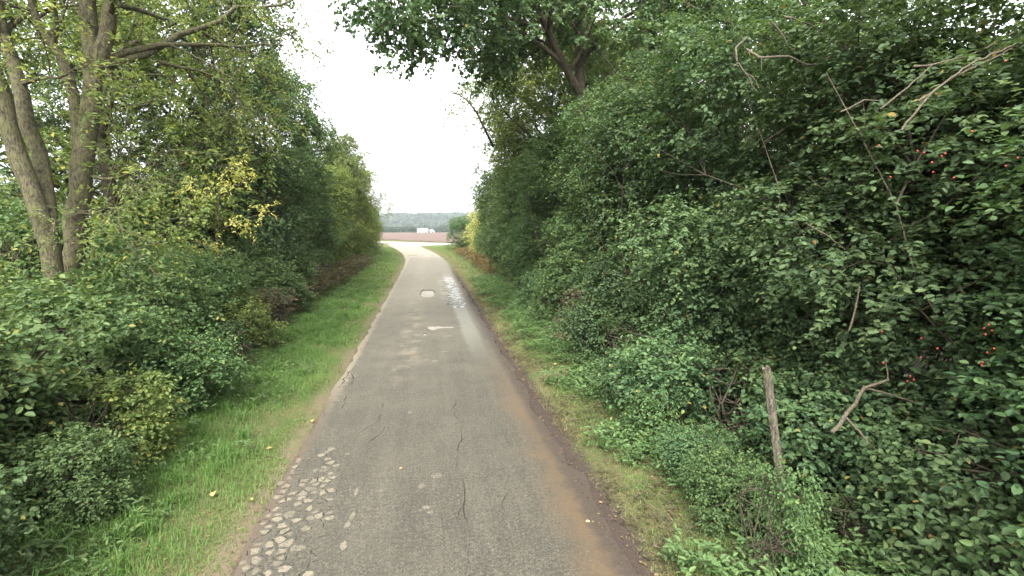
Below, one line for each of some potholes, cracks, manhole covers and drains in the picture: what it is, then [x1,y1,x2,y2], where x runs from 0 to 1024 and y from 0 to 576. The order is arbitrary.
crack [452,400,470,576]
